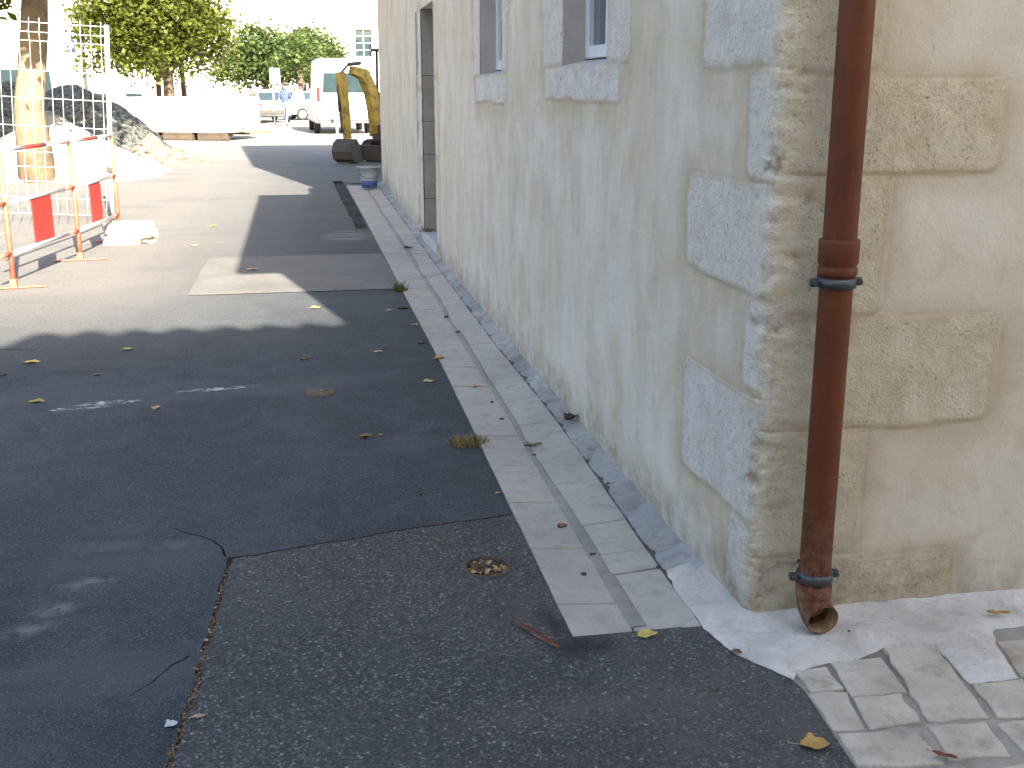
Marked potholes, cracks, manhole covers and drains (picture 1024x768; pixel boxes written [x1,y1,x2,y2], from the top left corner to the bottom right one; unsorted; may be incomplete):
crack [130,655,189,696]
